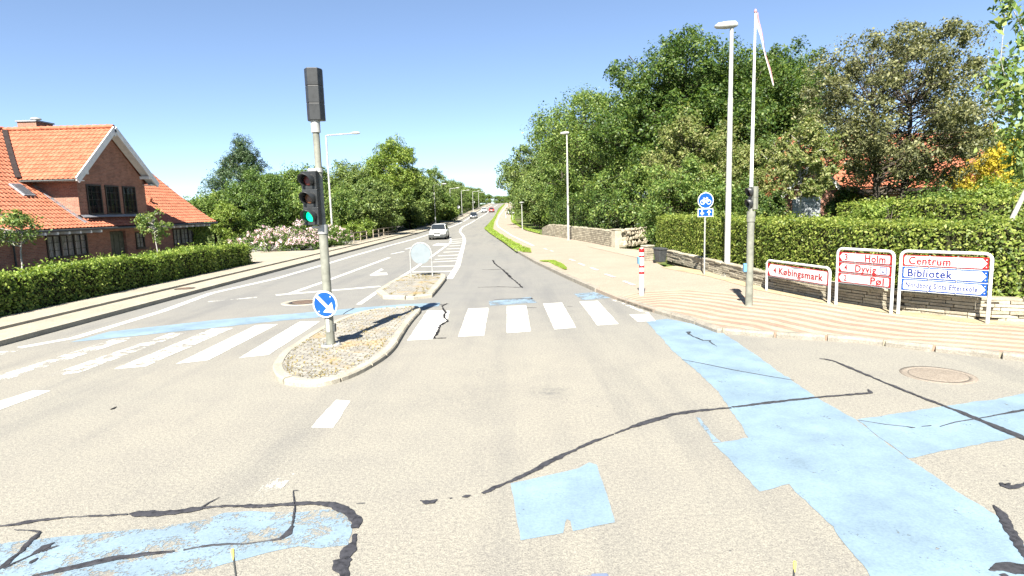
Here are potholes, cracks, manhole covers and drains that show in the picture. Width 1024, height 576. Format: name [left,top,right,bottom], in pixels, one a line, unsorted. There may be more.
crack [433,303,449,338]
crack [486,260,523,288]
crack [861,409,1024,428]
manhole cover [899,366,979,384]
